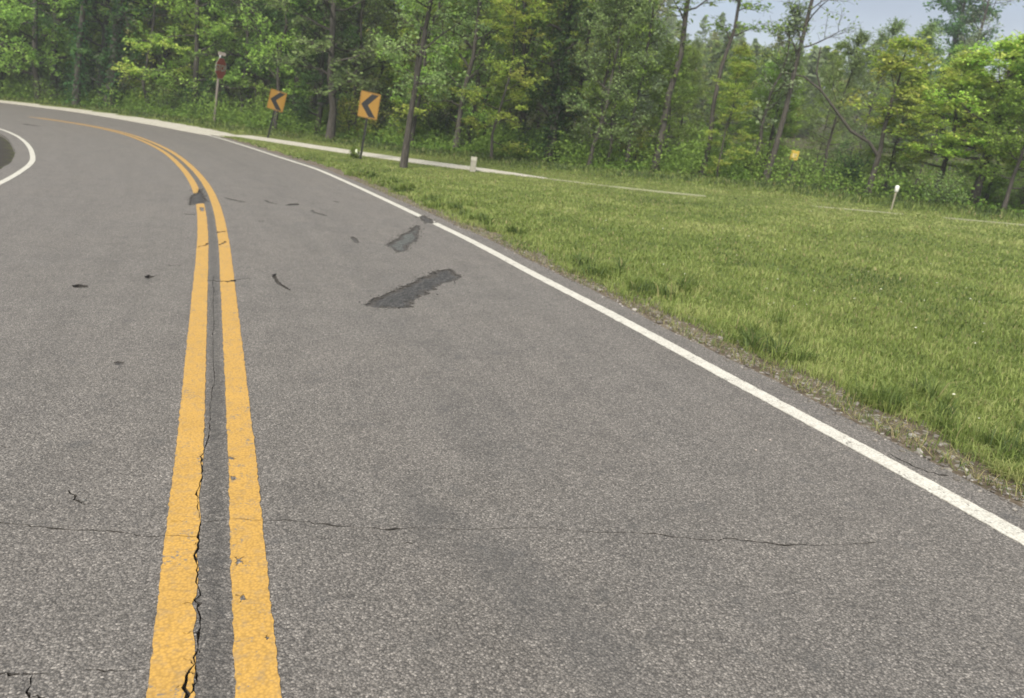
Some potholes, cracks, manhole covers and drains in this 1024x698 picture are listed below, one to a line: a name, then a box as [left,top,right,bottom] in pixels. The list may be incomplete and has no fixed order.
crack [0,672,50,698]
crack [0,519,875,546]
crack [182,277,249,698]
